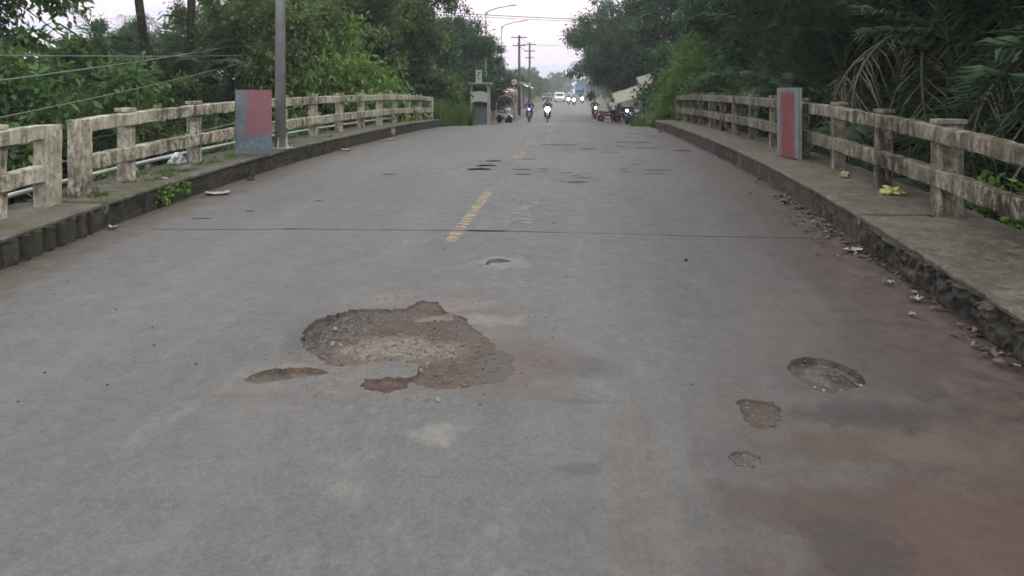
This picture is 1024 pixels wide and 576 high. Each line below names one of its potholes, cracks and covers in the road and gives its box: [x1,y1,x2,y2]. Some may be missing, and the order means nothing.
pothole [736,399,784,430]
pothole [728,451,762,469]
pothole [786,357,866,393]
pothole [247,295,558,413]
